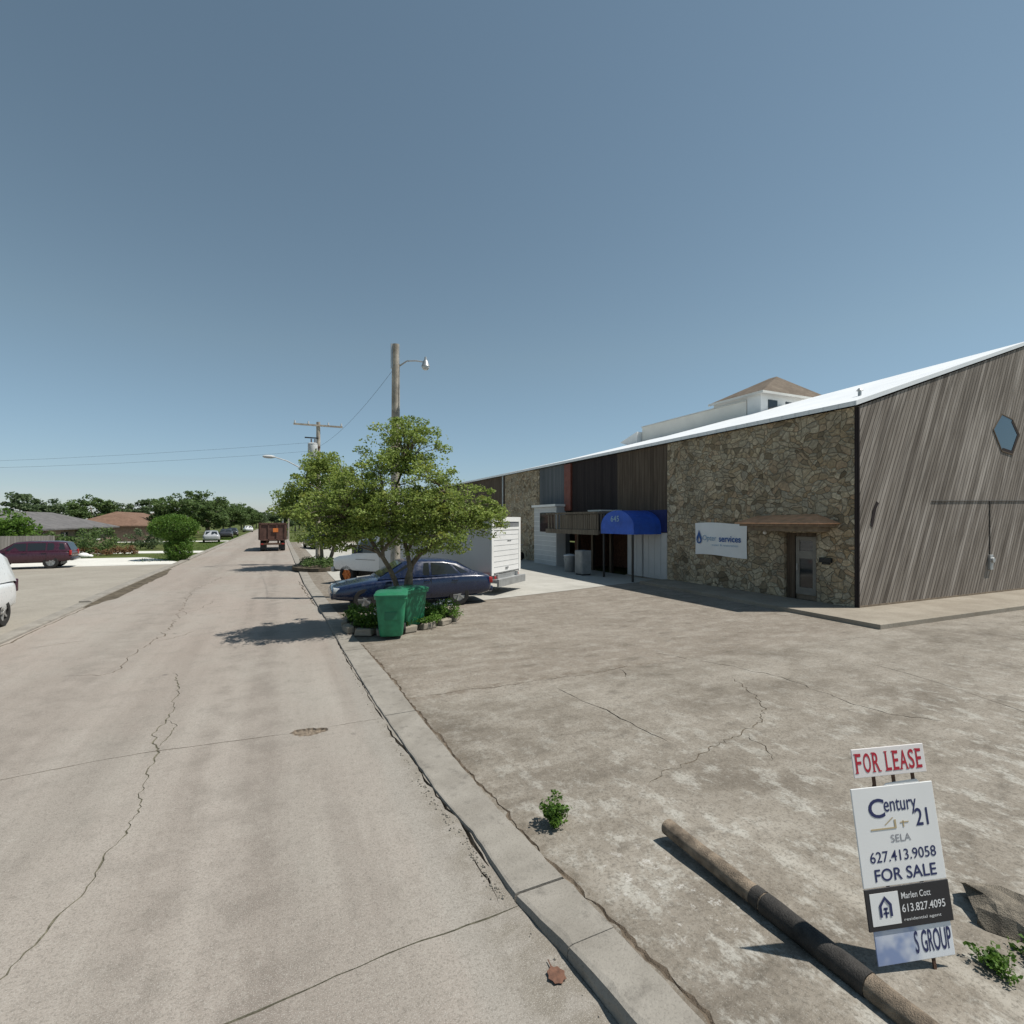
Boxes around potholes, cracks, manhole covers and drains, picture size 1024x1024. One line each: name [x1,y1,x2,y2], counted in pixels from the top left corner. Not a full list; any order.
crack [82,577,221,676]
crack [0,673,180,980]
crack [649,653,939,783]
